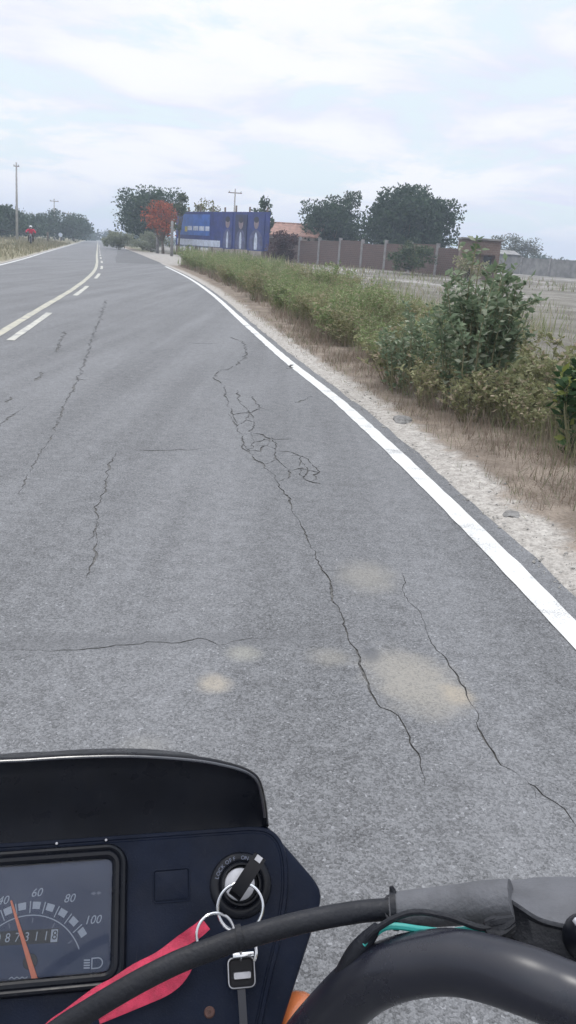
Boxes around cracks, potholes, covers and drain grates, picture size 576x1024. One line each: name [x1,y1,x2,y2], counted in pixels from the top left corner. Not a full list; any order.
crack [212,337,576,826]
crack [10,638,275,651]
crack [86,454,116,579]
crack [18,301,107,494]
